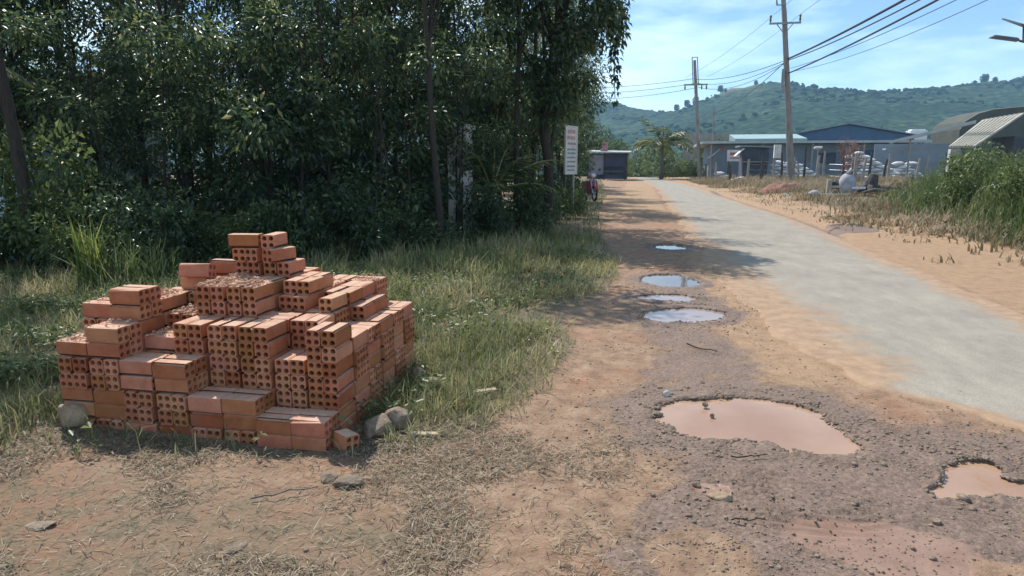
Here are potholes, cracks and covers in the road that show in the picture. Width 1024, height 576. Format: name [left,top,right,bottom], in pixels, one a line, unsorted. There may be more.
pothole [645,242,696,251]
pothole [613,377,918,476]
pothole [610,304,753,329]
pothole [823,224,884,236]
pothole [629,272,712,293]
pothole [624,290,711,305]
pothole [905,445,1024,514]
